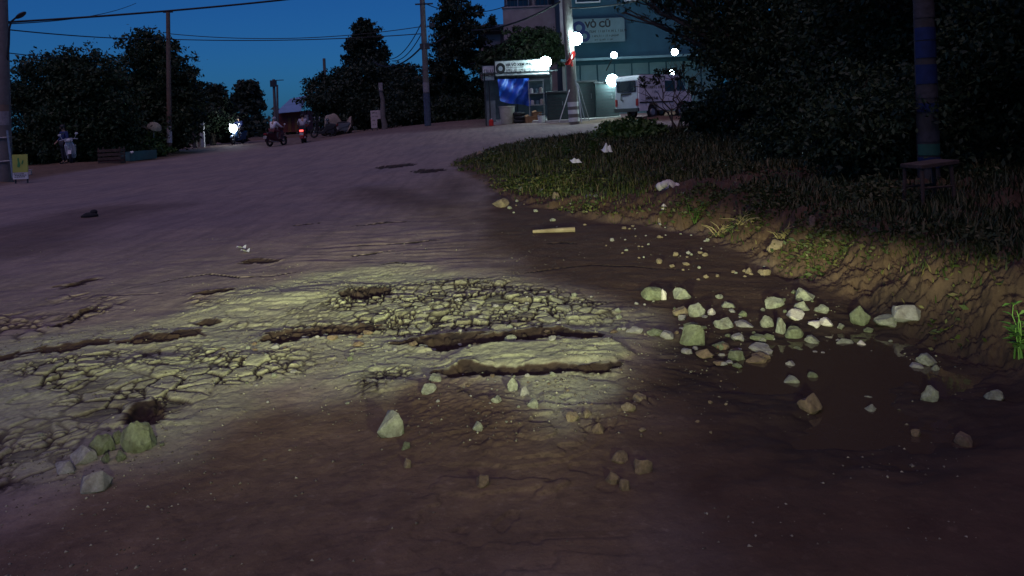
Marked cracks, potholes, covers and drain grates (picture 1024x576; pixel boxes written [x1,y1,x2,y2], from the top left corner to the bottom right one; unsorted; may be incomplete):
pothole [123,401,164,425]
pothole [0,329,204,362]
crack [0,221,681,501]
pothole [339,286,393,300]
pothole [392,326,603,352]
pothole [260,323,384,344]
pothole [197,318,220,326]
